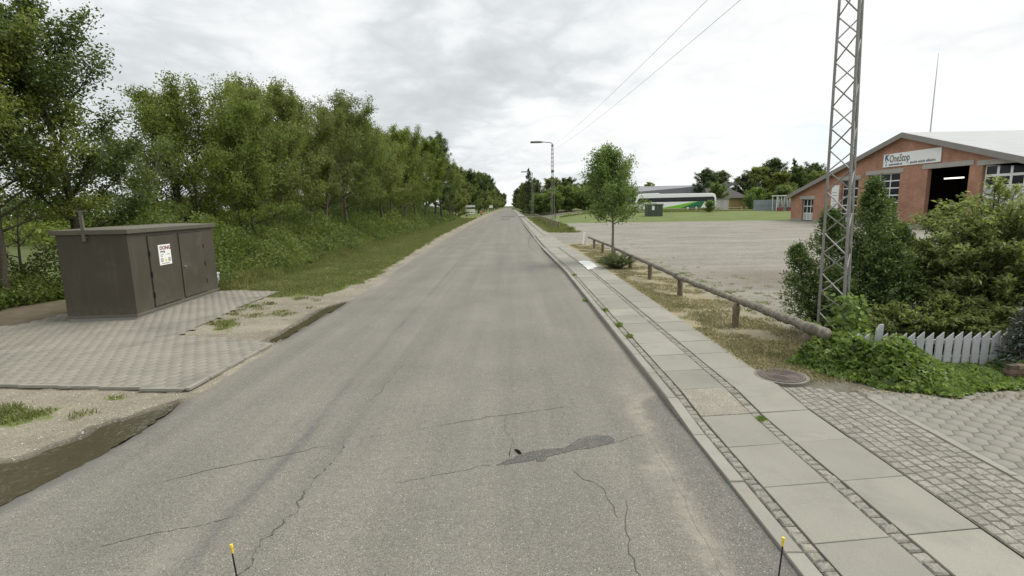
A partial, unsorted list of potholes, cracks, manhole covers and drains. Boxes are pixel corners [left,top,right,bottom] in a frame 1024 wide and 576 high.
manhole cover [754,368,810,387]
crack [573,470,641,576]
crack [146,407,558,485]
crack [237,438,345,576]
